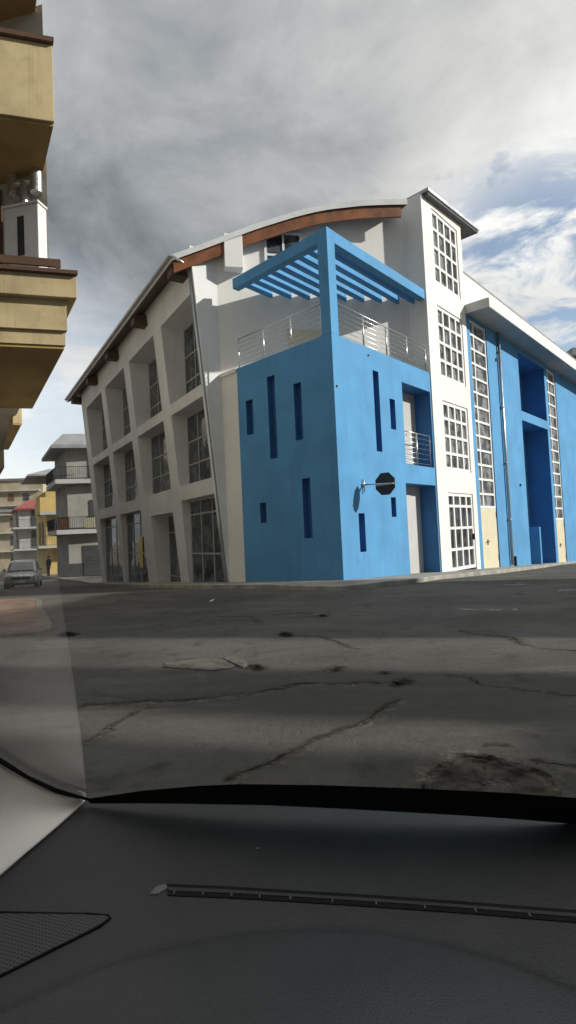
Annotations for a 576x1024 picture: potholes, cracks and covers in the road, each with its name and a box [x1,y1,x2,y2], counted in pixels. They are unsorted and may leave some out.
crack [459,630,576,652]
crack [309,635,362,651]
pothole [412,749,564,797]
crack [82,681,406,784]
crack [449,674,576,699]
